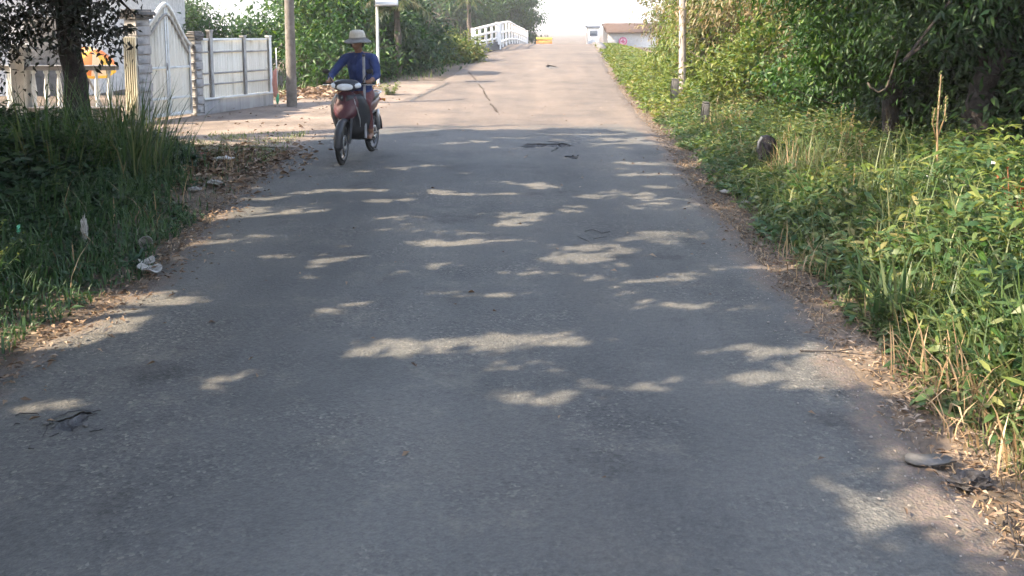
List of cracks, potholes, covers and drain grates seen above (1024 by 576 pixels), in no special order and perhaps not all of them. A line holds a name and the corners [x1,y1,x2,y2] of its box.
pothole [43,413,92,432]
